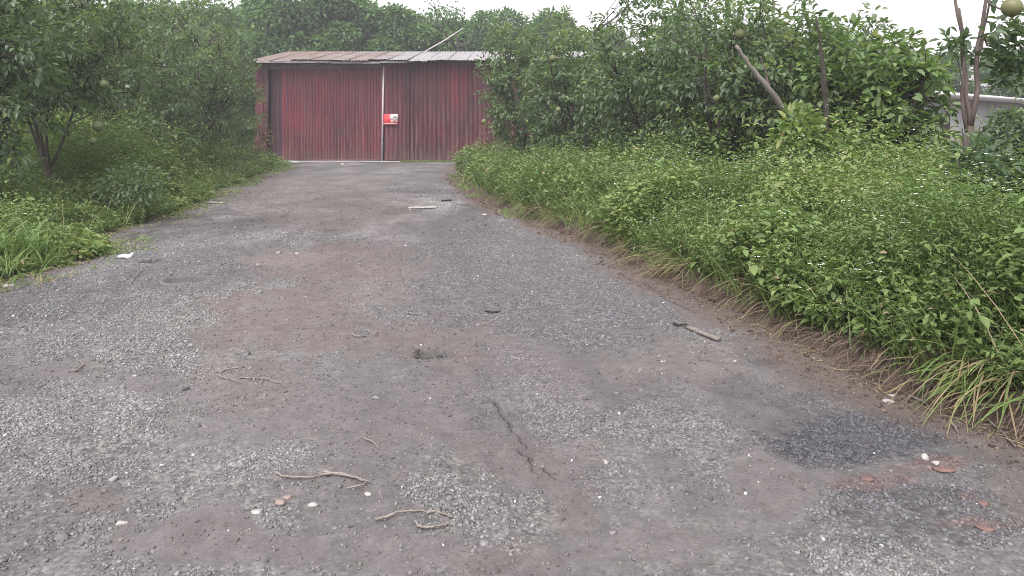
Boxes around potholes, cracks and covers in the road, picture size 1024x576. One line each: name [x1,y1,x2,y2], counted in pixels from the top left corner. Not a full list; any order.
pothole [406,348,455,361]
crack [488,399,556,480]
pothole [158,275,216,285]
